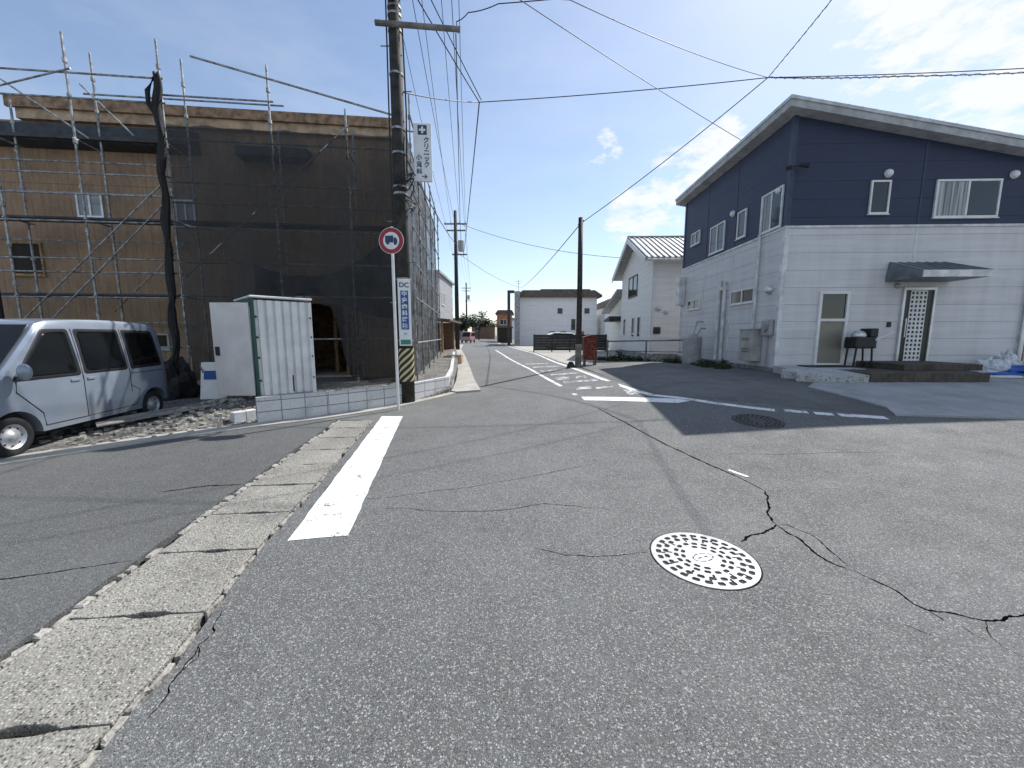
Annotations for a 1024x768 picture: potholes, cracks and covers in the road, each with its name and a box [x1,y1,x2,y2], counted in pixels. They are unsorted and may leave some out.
crack [388,467,589,512]
crack [0,561,126,580]
manhole cover [649,532,763,591]
crack [144,610,223,723]
manhole cover [732,414,785,428]
crack [593,406,1024,655]
crack [535,548,646,557]
